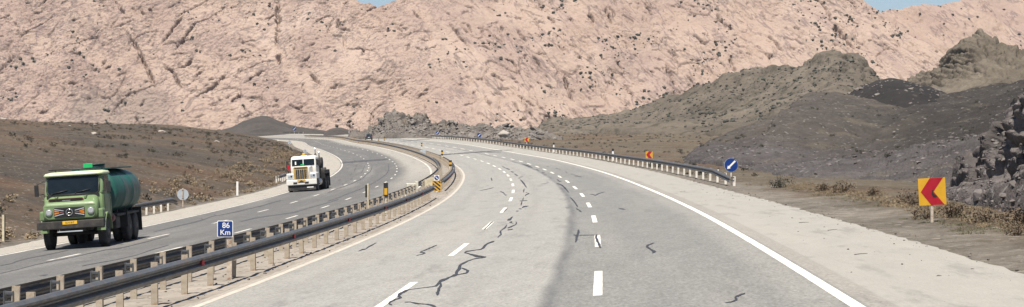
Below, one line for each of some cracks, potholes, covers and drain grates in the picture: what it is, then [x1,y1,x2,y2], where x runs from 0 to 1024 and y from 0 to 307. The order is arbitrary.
crack [480,164,626,229]
crack [574,229,601,248]
